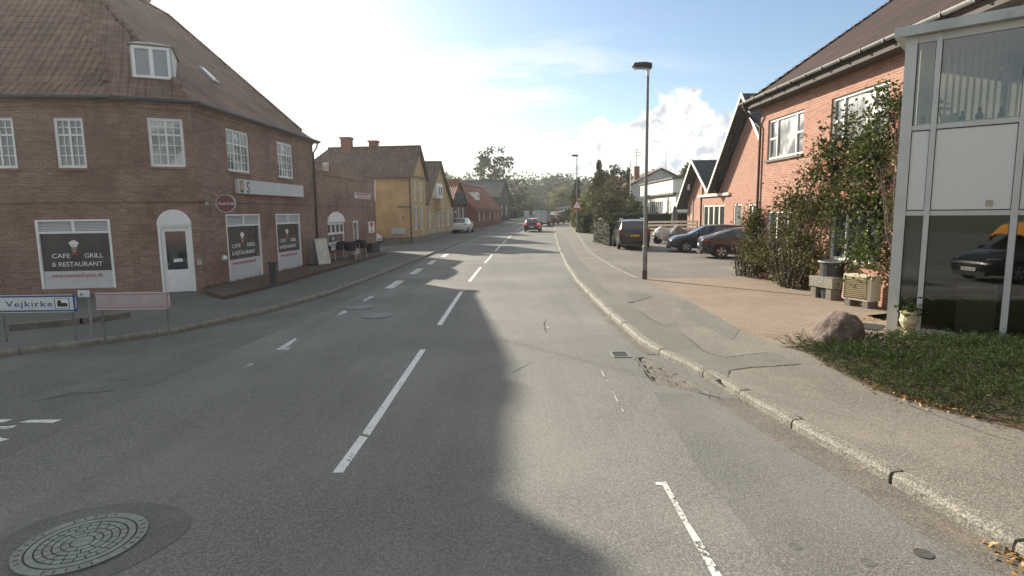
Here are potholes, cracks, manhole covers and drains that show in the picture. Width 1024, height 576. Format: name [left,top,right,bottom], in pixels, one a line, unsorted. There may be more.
pothole [638,357,712,394]
utility cover [912,548,934,559]
crack [32,379,161,402]
manhole cover [9,513,148,576]
